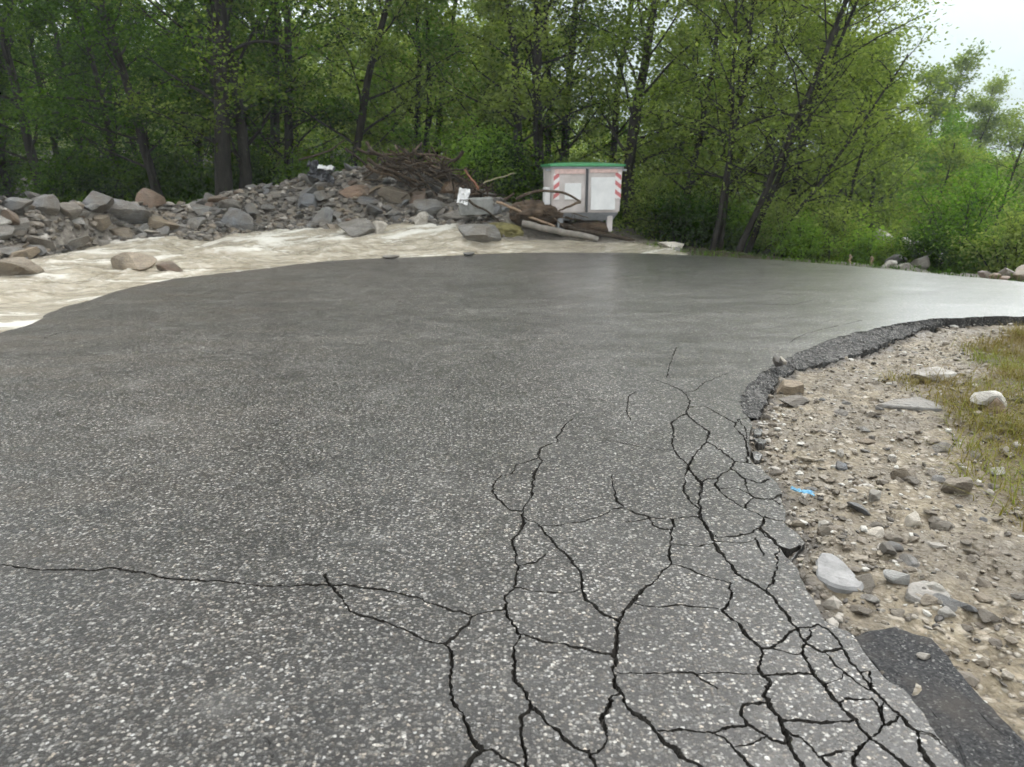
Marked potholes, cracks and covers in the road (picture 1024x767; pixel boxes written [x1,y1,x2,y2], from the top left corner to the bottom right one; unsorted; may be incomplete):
crack [1,347,949,767]
